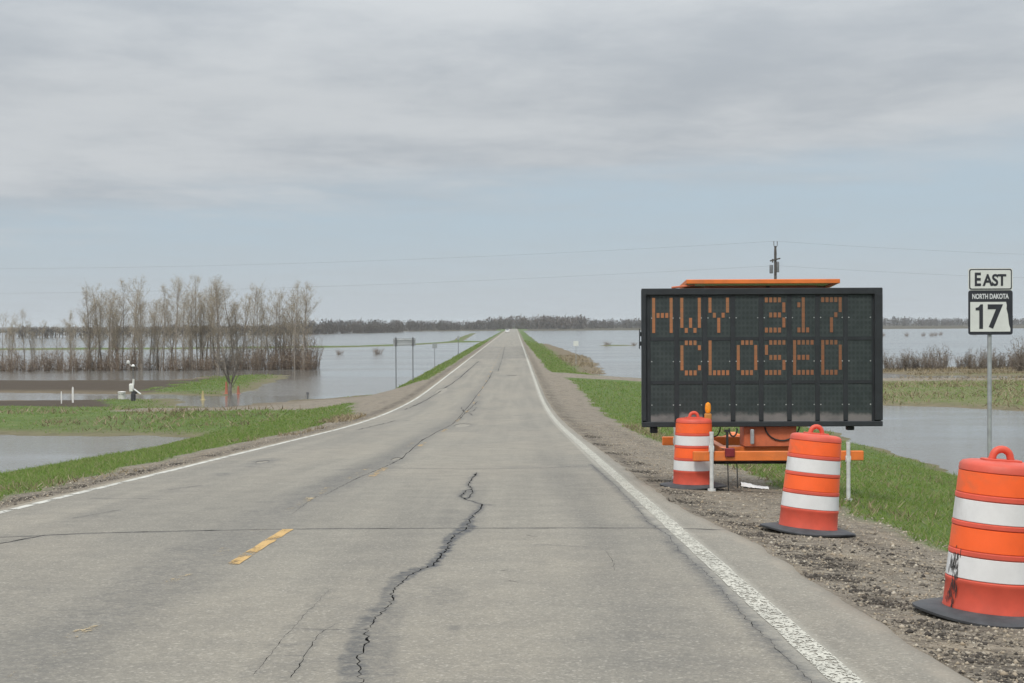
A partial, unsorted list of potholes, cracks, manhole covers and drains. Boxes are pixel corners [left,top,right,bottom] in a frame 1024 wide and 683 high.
crack [0,347,812,683]
